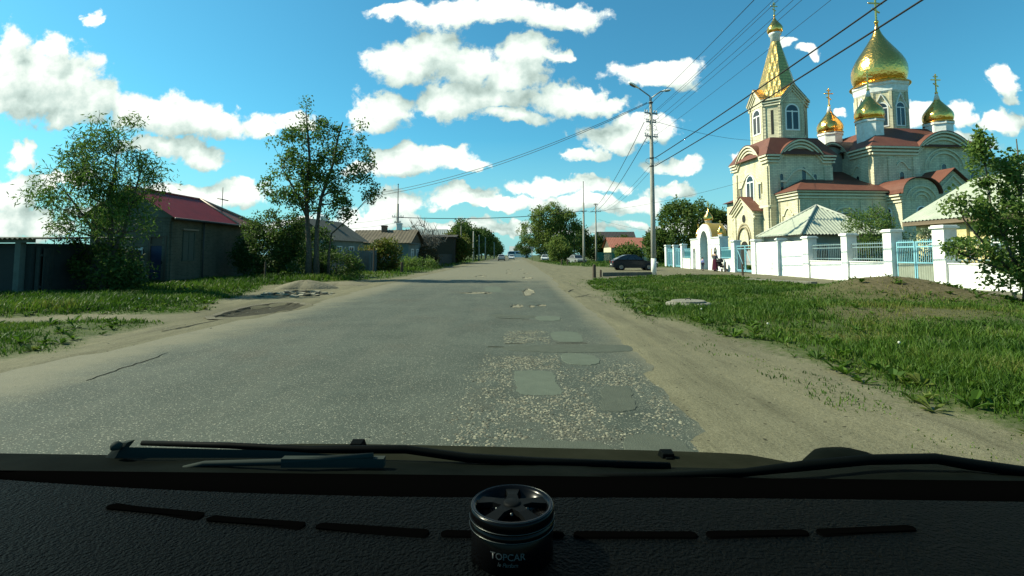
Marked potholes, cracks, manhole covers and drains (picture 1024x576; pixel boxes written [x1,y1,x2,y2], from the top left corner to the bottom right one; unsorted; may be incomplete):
crack [86,352,168,381]
manhole cover [666,298,711,307]
